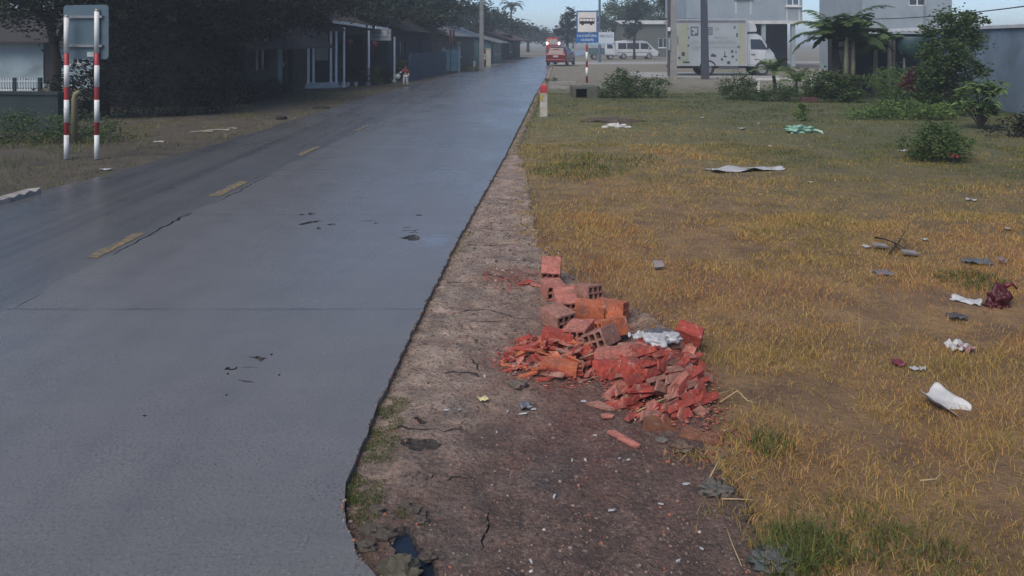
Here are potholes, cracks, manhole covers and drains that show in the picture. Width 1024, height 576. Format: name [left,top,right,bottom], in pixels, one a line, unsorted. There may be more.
pothole [400,438,442,451]
crack [113,213,191,255]
crack [469,505,490,550]
pothole [390,526,439,576]
